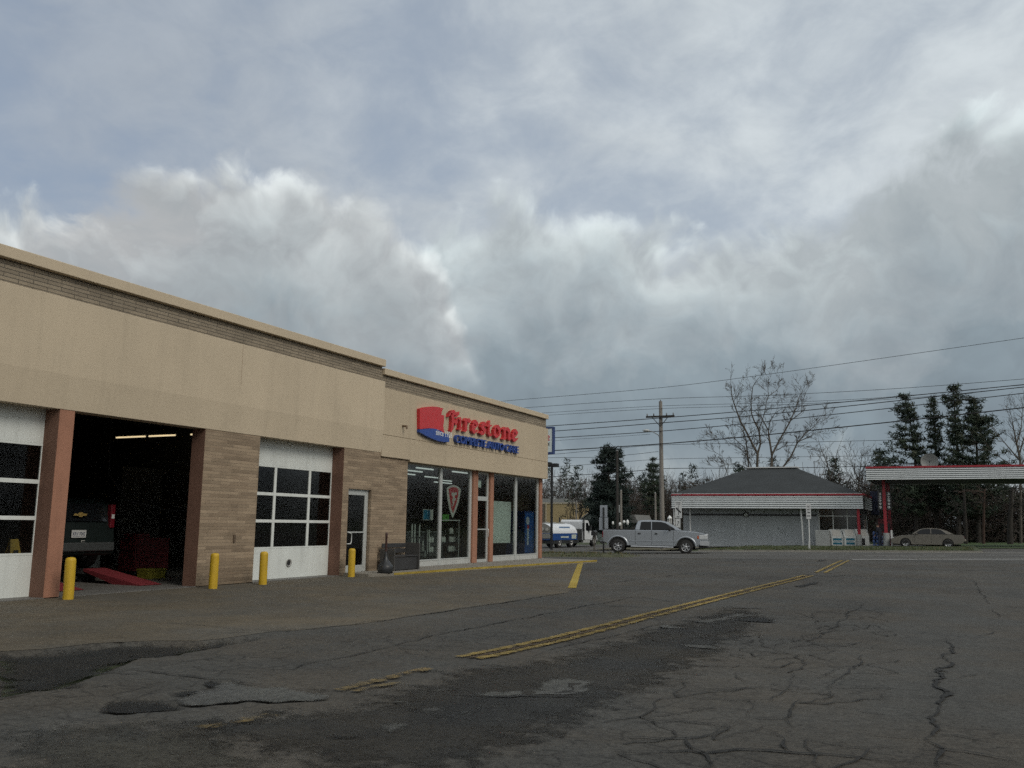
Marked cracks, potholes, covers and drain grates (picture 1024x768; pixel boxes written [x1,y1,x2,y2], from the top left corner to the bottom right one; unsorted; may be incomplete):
crack [626,602,1016,767]
